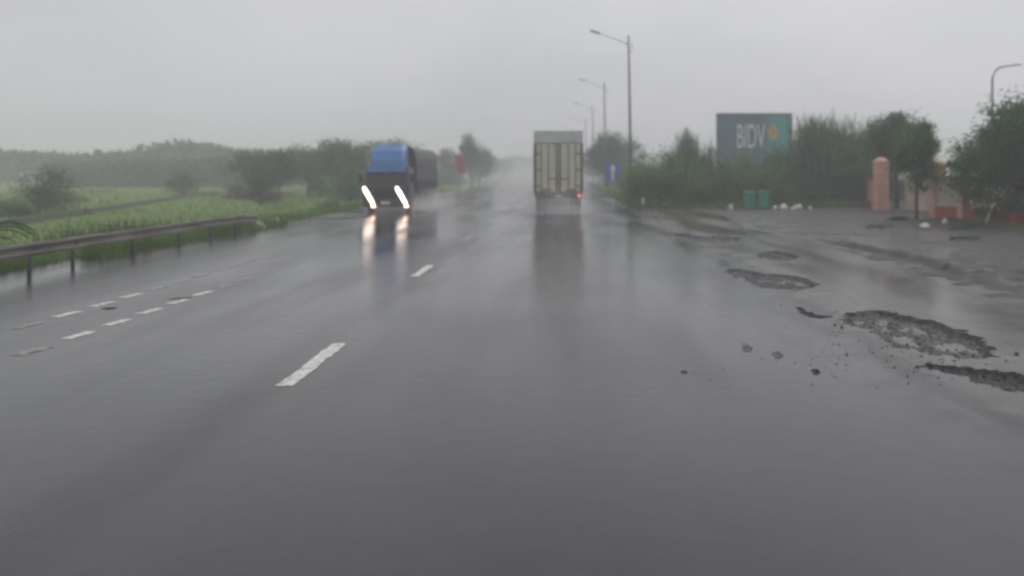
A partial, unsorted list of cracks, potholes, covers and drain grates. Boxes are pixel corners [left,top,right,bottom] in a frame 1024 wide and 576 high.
pothole [723,268,821,290]
pothole [756,250,802,261]
pothole [915,362,1024,392]
pothole [795,307,834,319]
pothole [838,309,1001,359]
